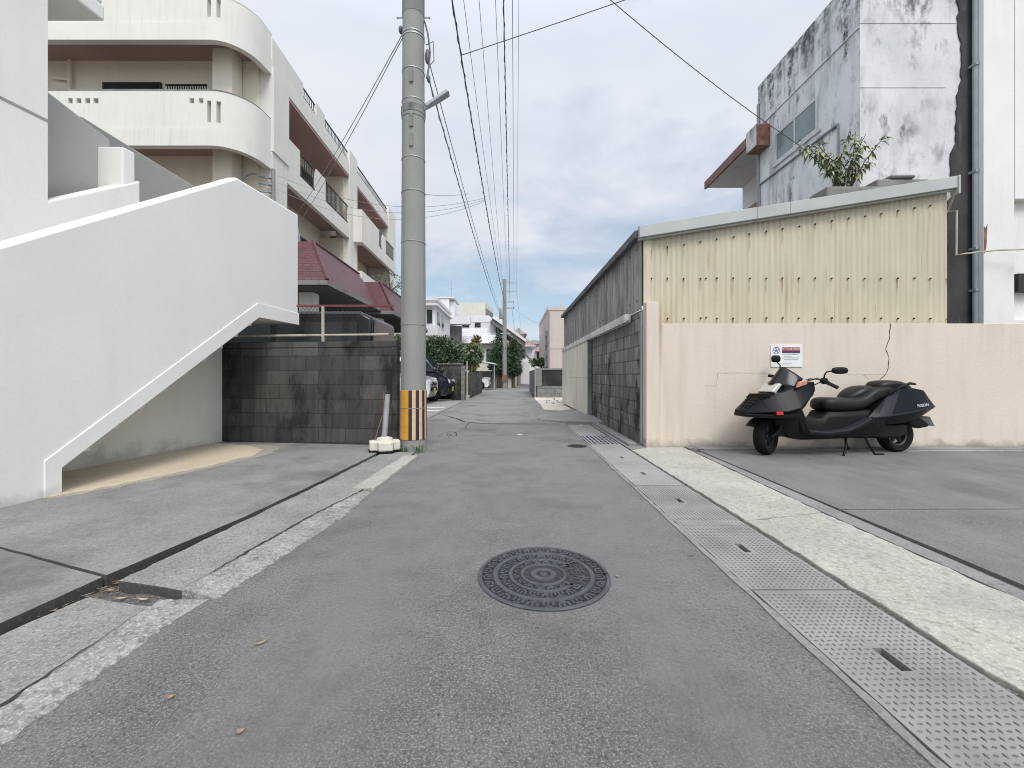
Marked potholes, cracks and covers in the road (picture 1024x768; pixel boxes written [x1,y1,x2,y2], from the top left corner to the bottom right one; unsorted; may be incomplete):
manhole cover [478,547,611,612]
drain grate [579,435,620,445]
